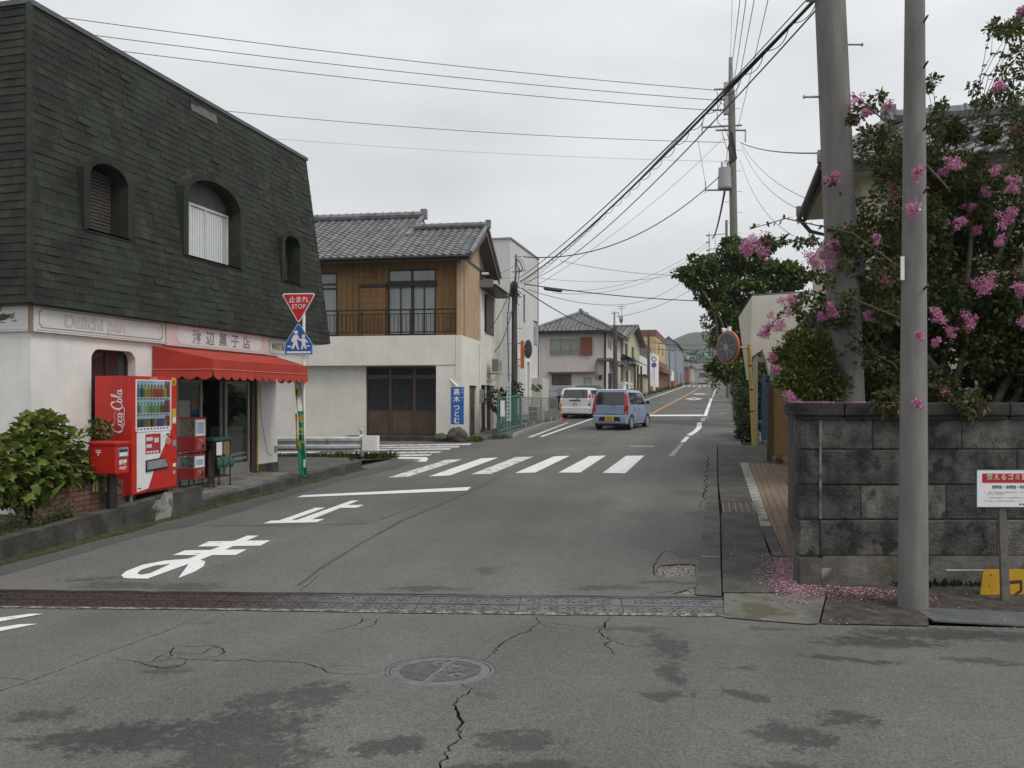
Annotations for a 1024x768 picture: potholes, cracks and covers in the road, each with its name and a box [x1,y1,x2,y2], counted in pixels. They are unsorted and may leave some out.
crack [0,615,366,691]
crack [483,617,640,663]
crack [439,684,473,768]
manhole cover [385,656,495,686]
crack [699,455,710,504]
pothole [656,564,697,577]
drain grate [721,502,757,513]
